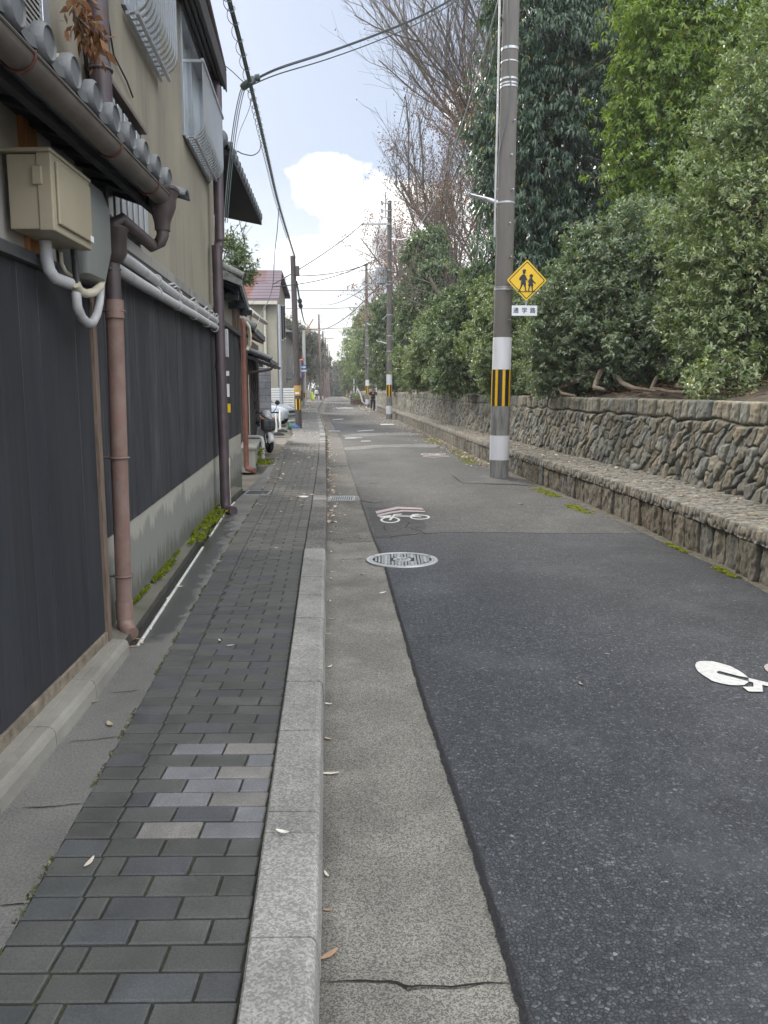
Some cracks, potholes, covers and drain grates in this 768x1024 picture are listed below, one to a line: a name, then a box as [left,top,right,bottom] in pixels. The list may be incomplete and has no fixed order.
manhole cover [366,552,438,568]
crack [331,979,511,988]
